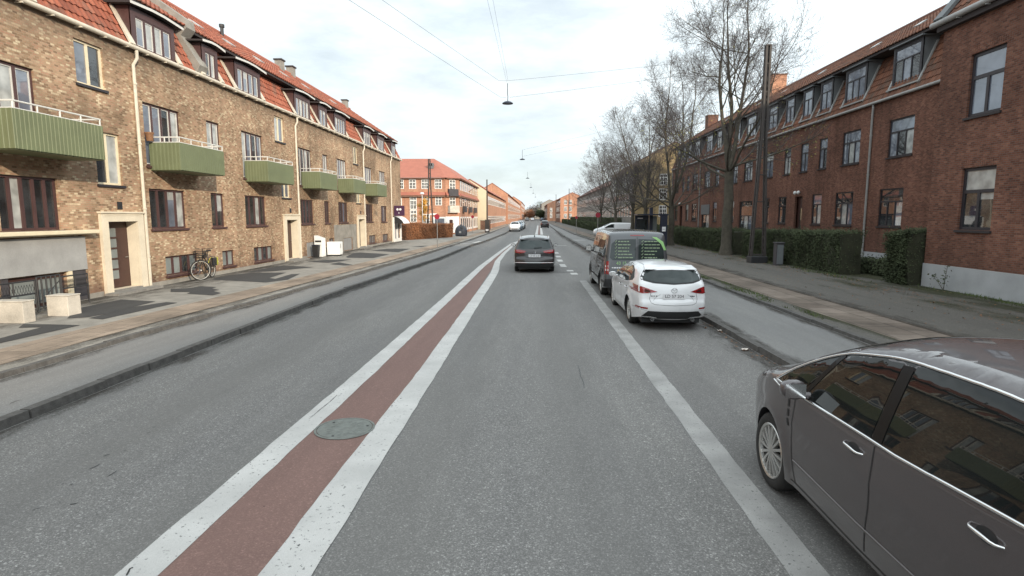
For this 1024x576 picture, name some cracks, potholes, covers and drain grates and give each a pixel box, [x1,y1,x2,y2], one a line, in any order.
manhole cover [314,418,375,440]
